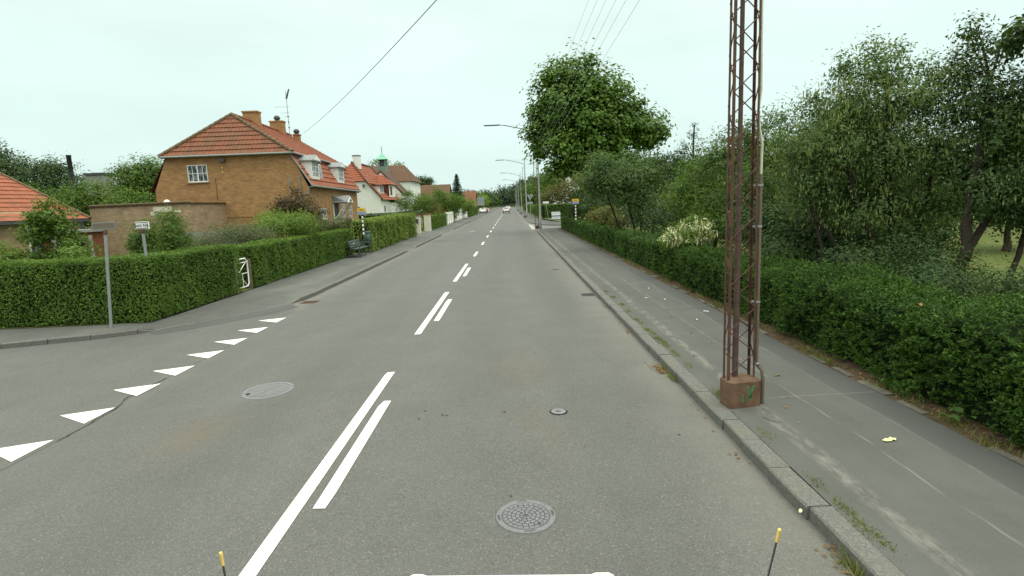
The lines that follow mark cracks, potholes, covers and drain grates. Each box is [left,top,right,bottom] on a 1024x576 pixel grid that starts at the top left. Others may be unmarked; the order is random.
manhole cover [241,382,294,399]
manhole cover [496,500,556,534]
